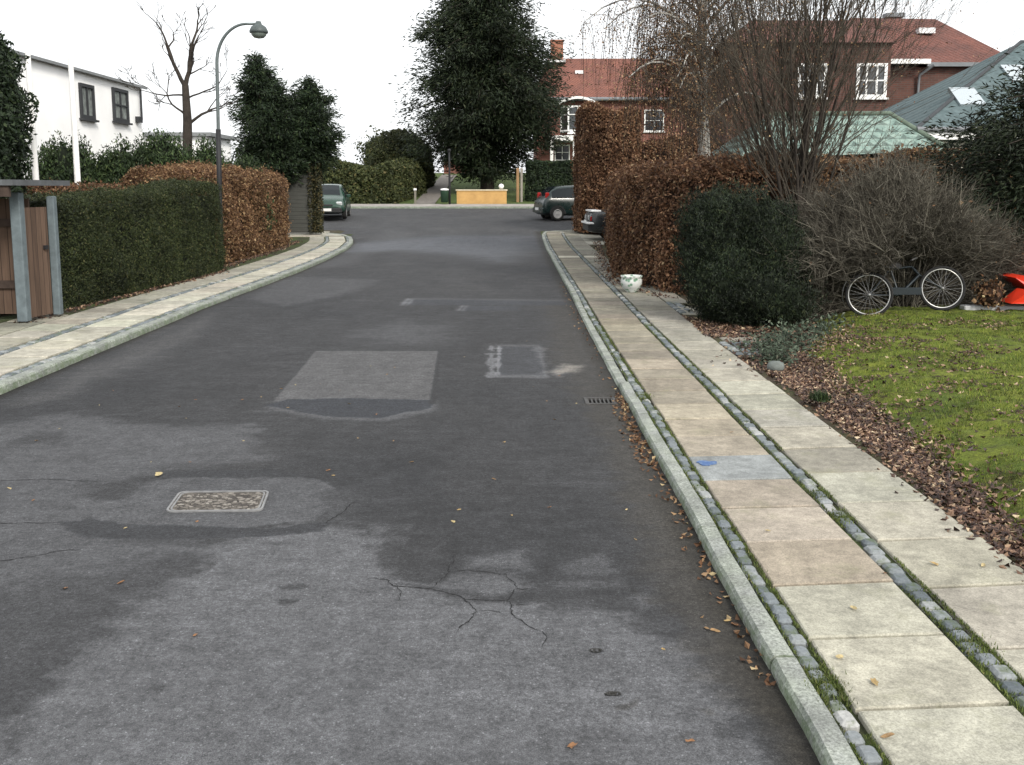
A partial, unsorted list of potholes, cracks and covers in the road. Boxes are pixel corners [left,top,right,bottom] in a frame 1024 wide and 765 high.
crack [374,554,547,646]
manhole cover [166,490,269,513]
